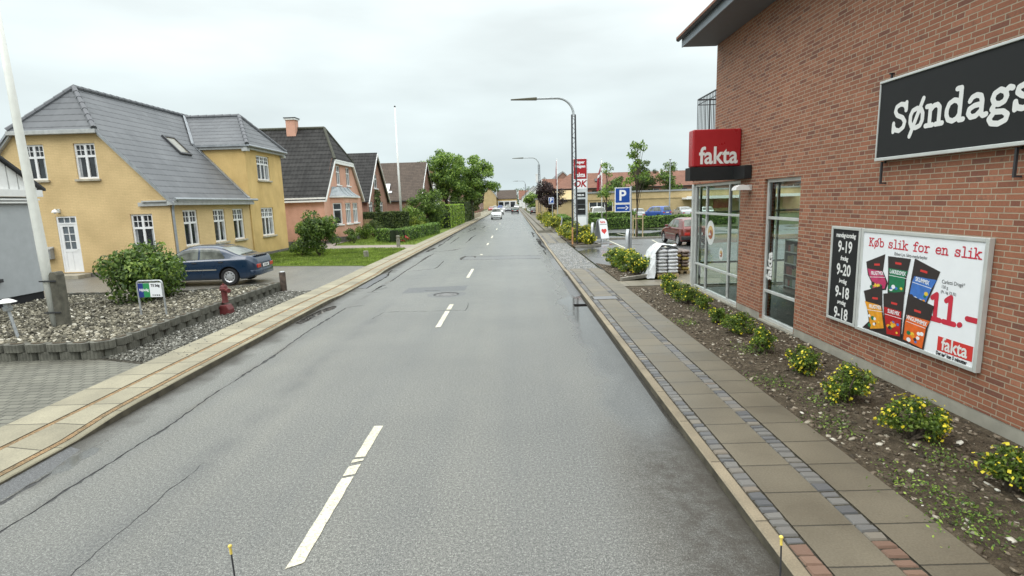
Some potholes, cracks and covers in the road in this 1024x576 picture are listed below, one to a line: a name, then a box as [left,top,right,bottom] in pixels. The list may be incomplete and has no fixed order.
crack [71,463,203,576]
